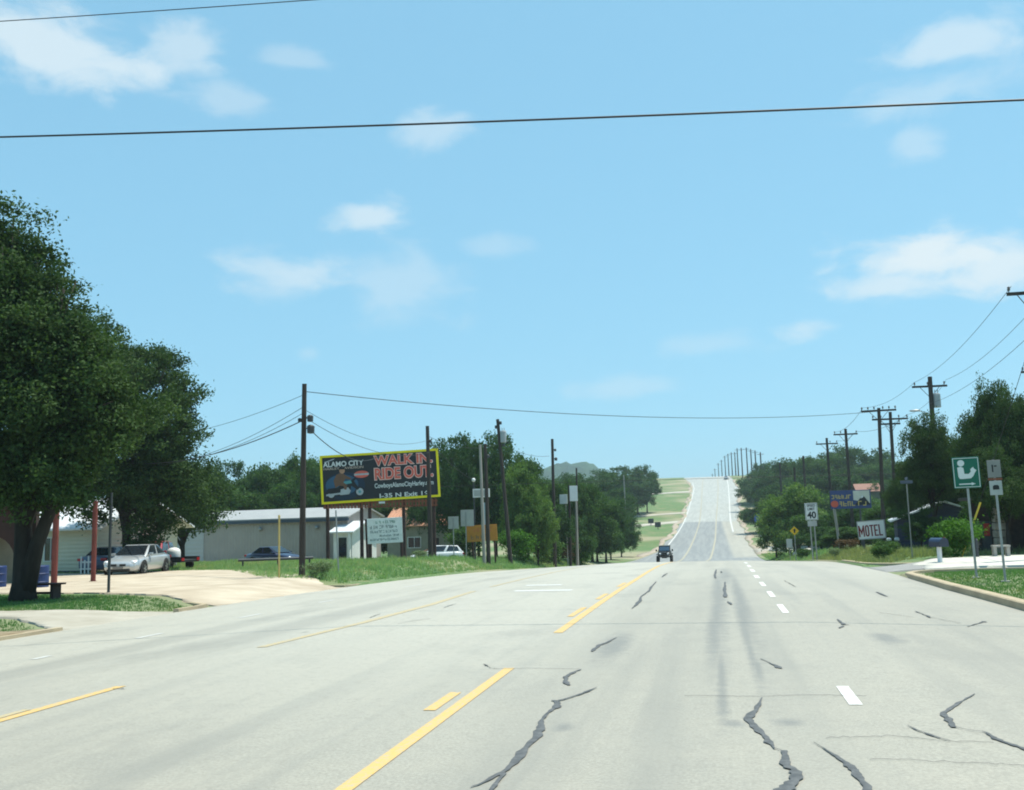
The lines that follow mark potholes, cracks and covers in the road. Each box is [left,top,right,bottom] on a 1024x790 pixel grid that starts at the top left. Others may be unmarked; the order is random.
crack [828,735,994,743]
